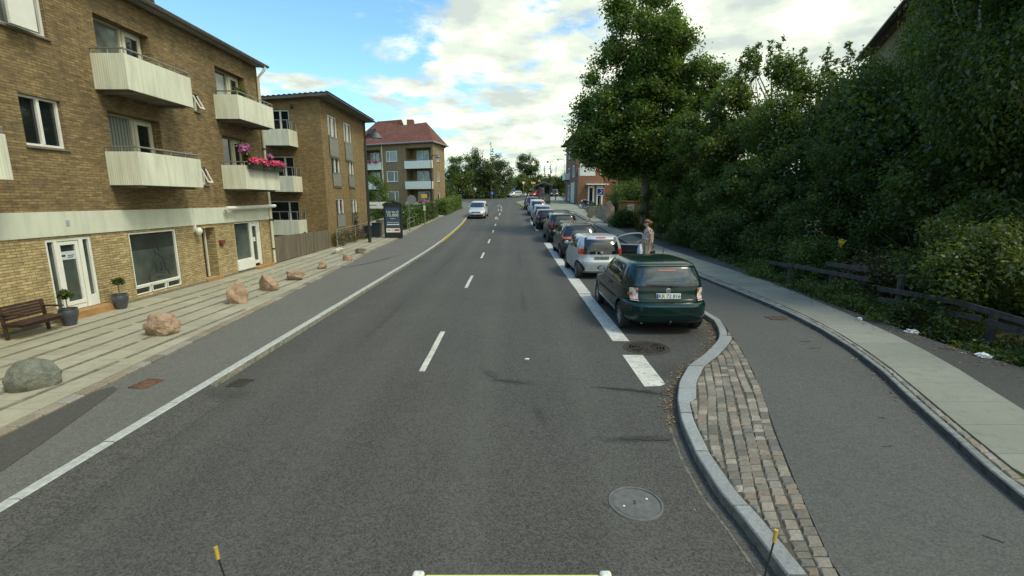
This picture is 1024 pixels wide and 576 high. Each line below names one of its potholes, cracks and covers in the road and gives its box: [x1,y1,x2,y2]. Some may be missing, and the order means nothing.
utility cover [128,378,164,389]
manhole cover [623,341,671,355]
manhole cover [608,486,664,521]
drain grate [225,378,255,387]
